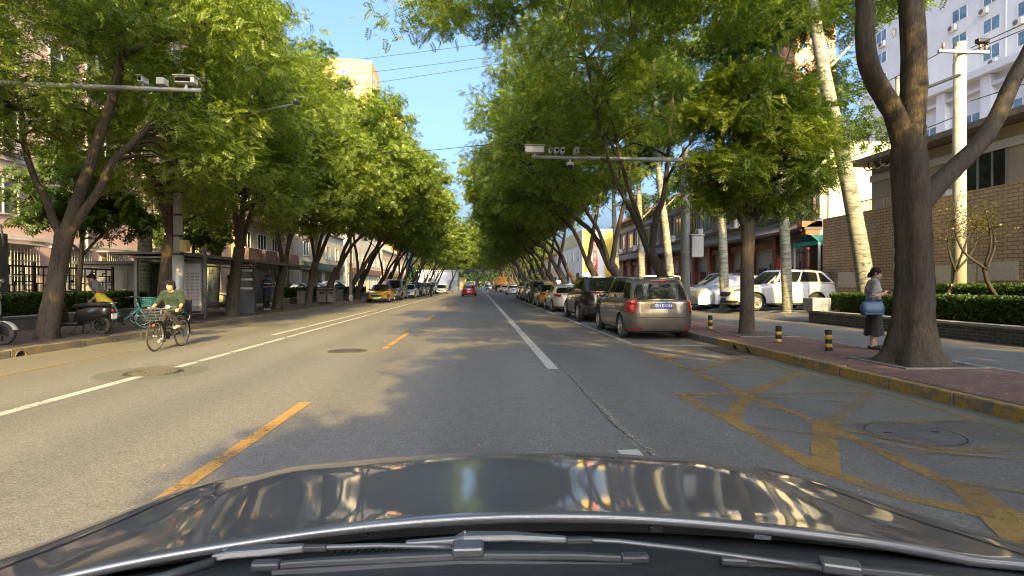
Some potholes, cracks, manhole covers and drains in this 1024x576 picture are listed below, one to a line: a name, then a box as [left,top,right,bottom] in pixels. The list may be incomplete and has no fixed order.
crack [560,366,652,456]
manhole cover [122,368,184,377]
manhole cover [857,421,976,448]
